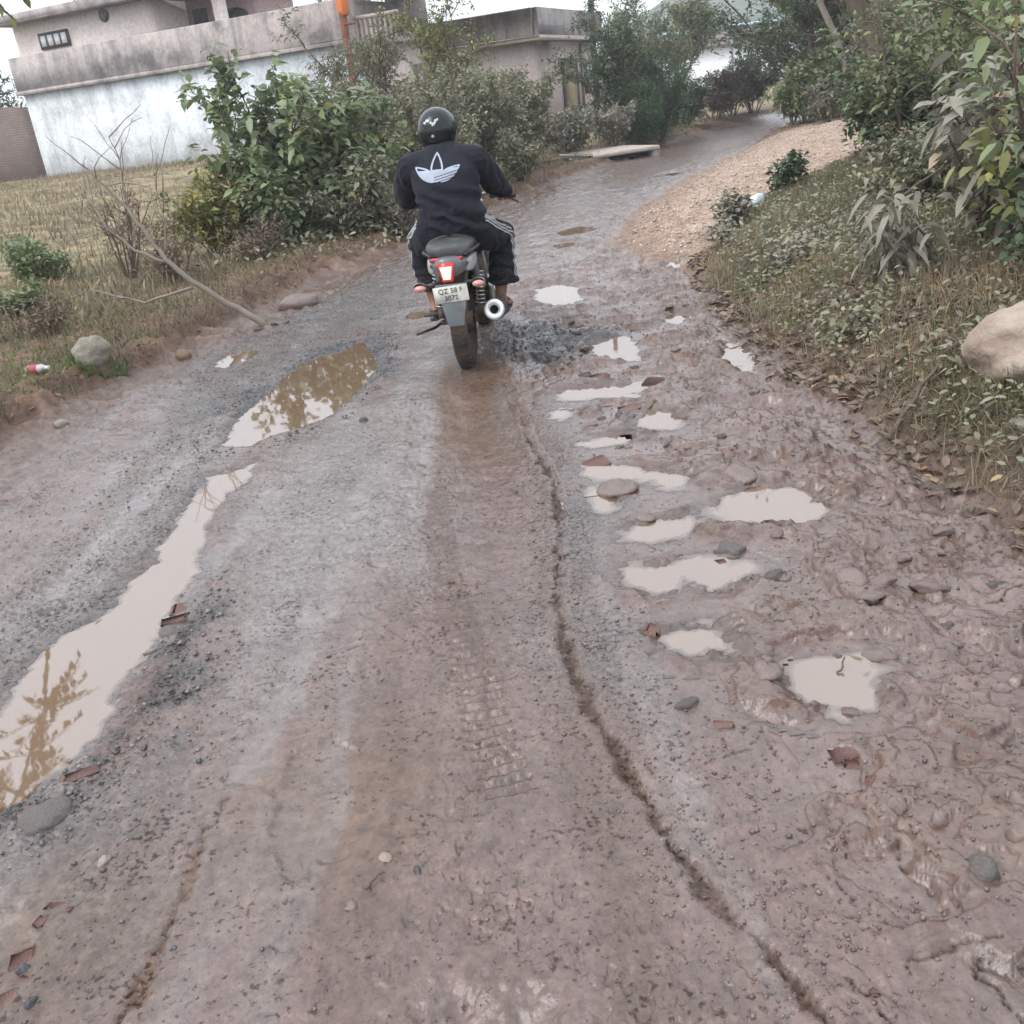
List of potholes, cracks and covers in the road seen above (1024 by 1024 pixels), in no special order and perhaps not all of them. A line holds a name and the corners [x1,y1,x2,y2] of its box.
pothole [519,276,596,308]
pothole [728,624,936,740]
pothole [0,452,279,833]
pothole [568,330,662,367]
pothole [581,537,786,612]
pothole [201,335,395,453]
pothole [616,605,794,686]
pothole [670,467,857,539]
pothole [586,506,734,554]
pothole [531,375,677,410]
